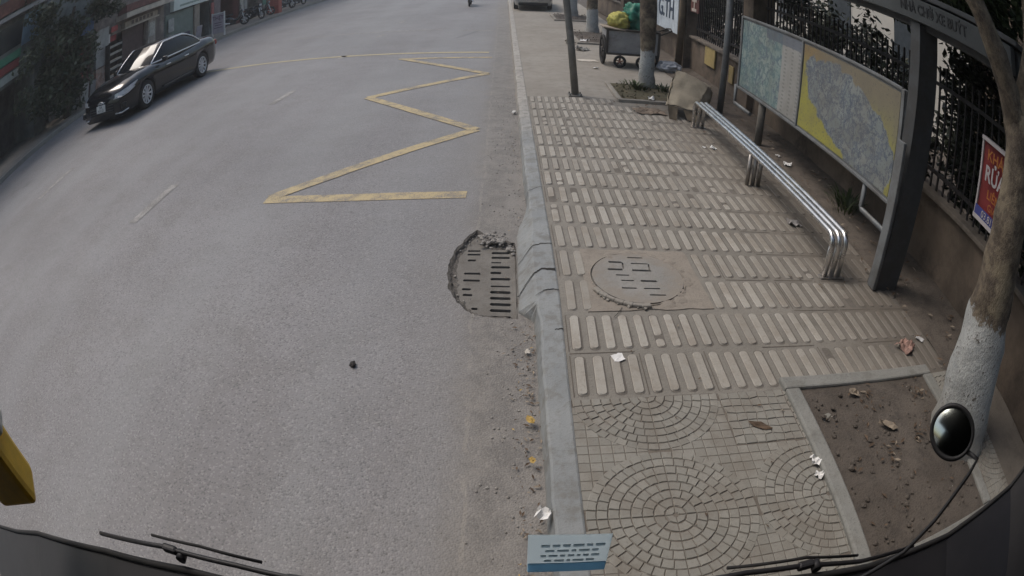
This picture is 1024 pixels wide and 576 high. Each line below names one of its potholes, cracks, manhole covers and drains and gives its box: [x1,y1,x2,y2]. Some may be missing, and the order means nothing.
drain grate [451,237,517,319]
manhole cover [580,249,714,312]
